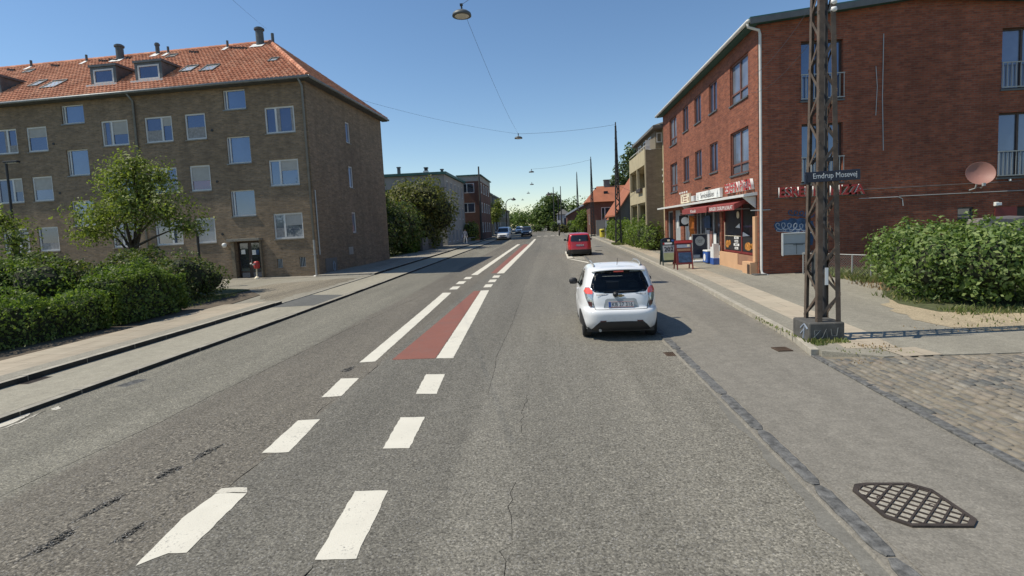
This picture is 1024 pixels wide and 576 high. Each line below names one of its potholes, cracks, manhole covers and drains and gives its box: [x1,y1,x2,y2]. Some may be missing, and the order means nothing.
crack [500,480,517,576]
